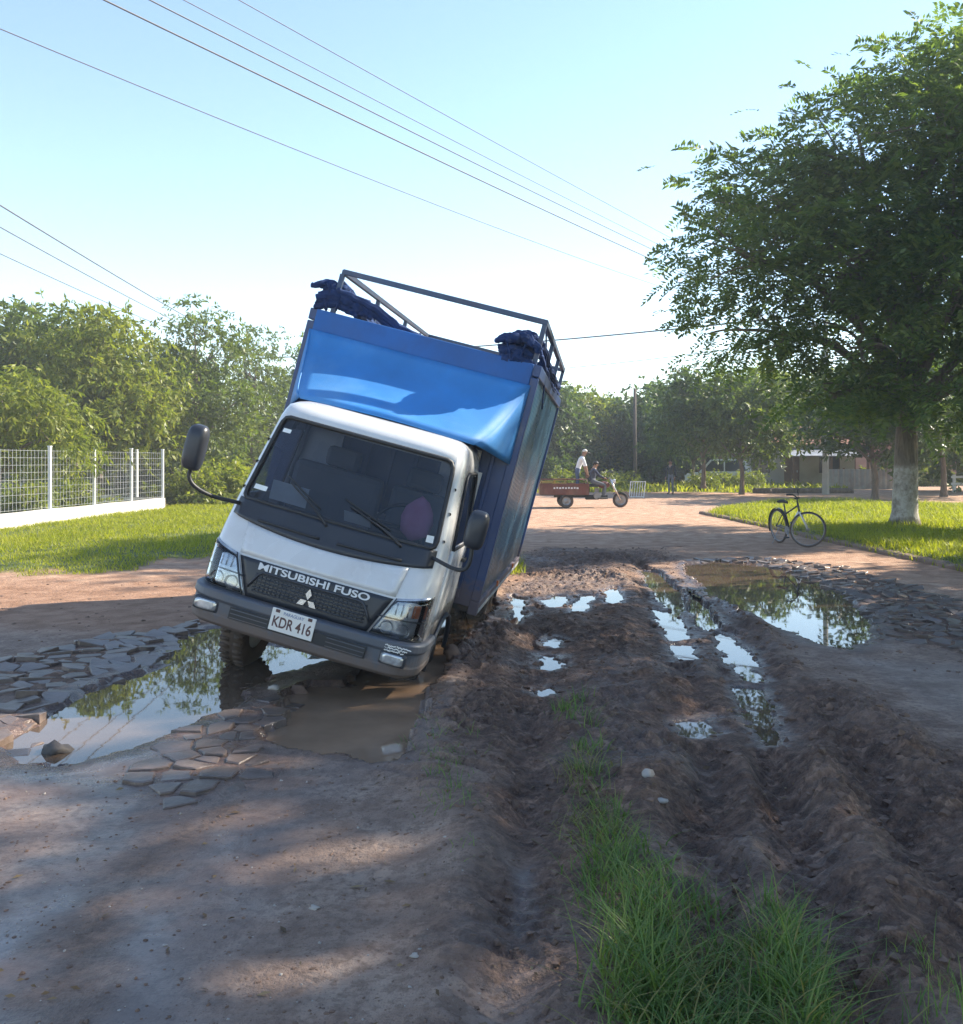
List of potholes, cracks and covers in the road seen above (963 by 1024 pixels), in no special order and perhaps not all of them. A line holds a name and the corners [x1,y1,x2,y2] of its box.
pothole [0,624,337,775]
pothole [674,559,895,652]
